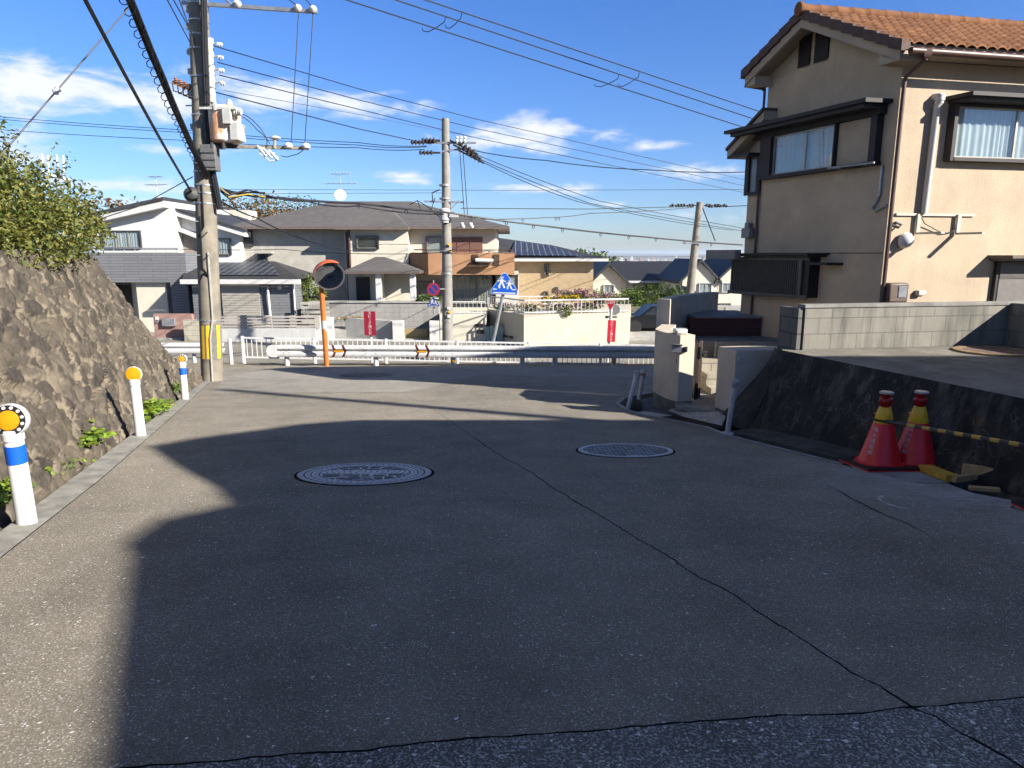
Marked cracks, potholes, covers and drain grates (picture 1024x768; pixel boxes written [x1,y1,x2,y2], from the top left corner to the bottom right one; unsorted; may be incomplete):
manhole cover [294,462,435,486]
crack [437,412,1024,768]
manhole cover [576,443,676,458]
